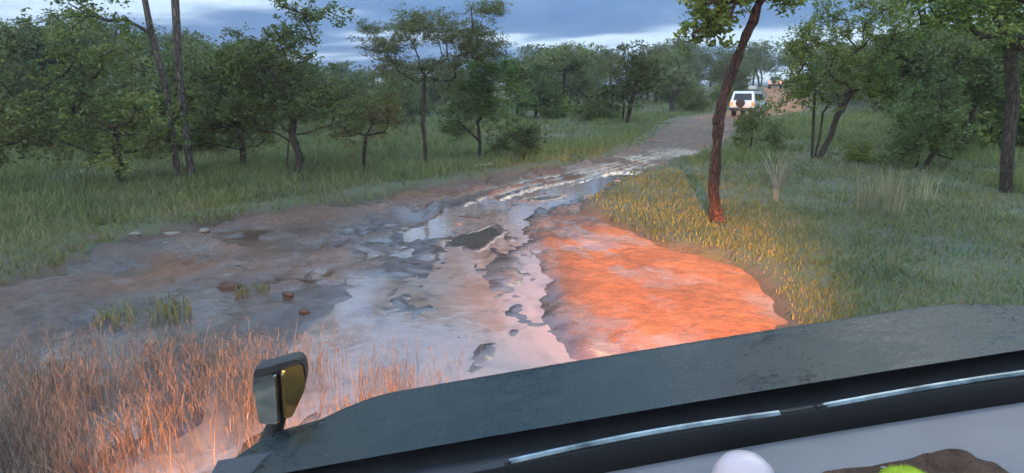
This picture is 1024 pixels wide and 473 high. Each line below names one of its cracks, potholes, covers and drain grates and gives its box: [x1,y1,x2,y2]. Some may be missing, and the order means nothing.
pothole [444,223,508,253]
